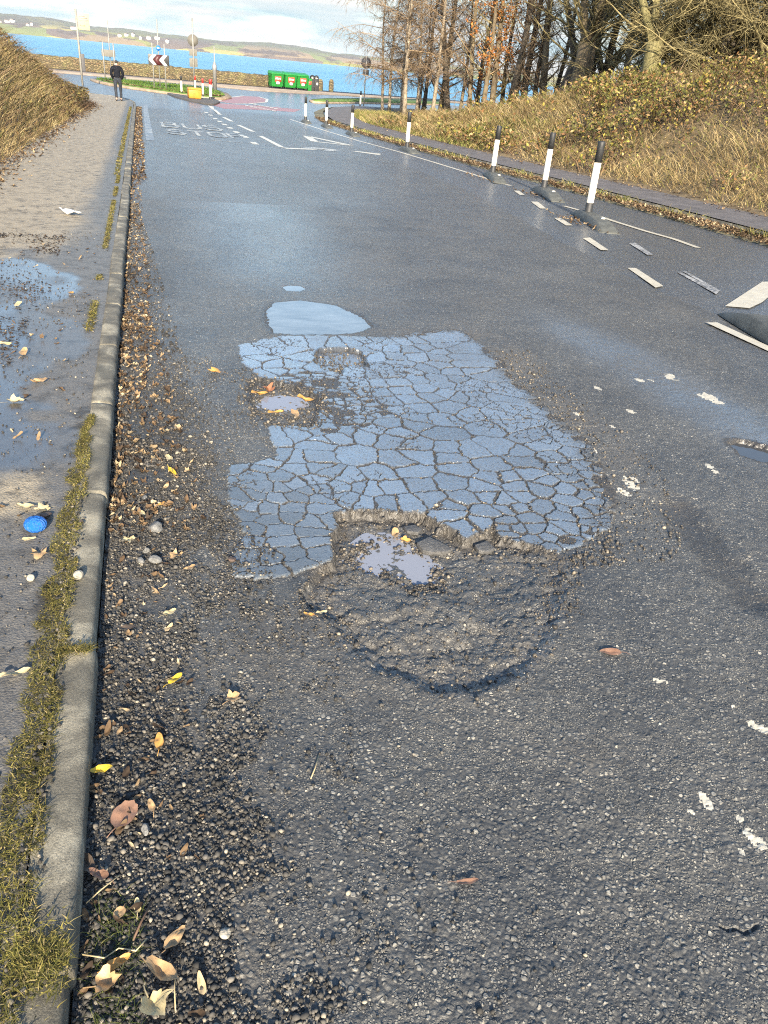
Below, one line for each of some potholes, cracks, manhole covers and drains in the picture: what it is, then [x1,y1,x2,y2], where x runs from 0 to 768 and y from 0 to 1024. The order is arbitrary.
pothole [298,509,580,706]
pothole [245,376,321,427]
pothole [314,347,371,374]
crack [717,922,761,936]
pothole [726,438,768,462]
